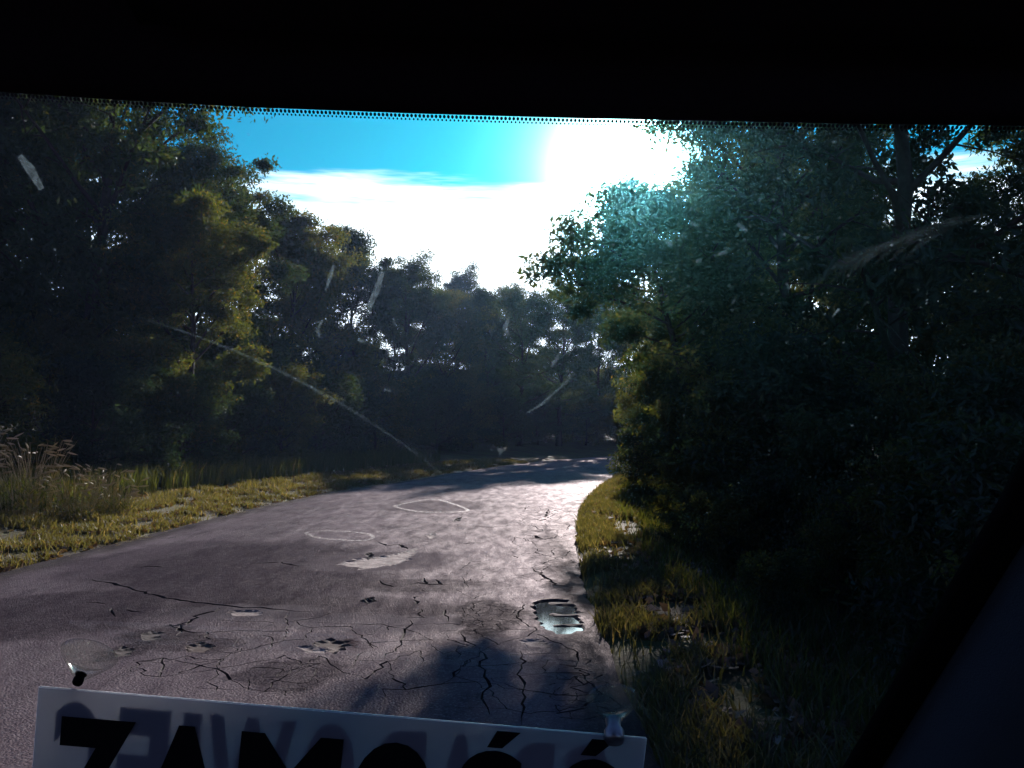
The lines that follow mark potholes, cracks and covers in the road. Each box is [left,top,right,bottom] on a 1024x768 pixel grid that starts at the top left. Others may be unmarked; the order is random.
pothole [530,599,585,635]
crack [467,503,573,588]
crack [93,560,622,725]
pothole [312,638,353,654]
pothole [186,642,216,652]
pothole [296,645,330,653]
pothole [141,631,166,641]
